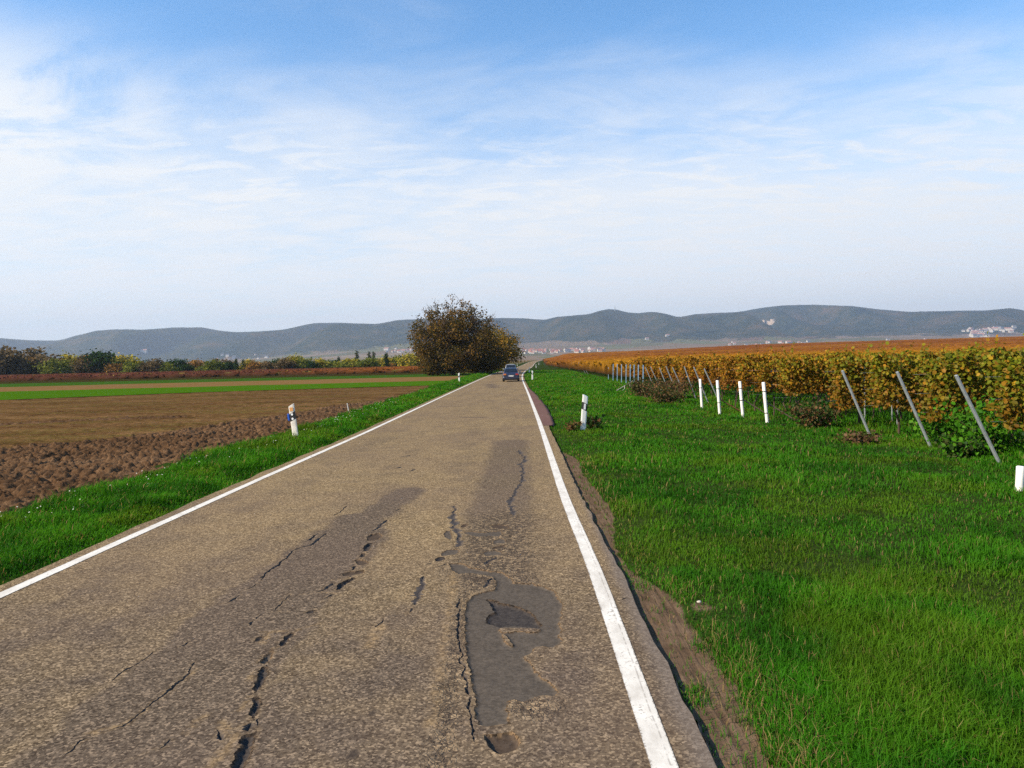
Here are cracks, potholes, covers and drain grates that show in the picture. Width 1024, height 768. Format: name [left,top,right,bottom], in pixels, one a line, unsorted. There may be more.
crack [455,557,497,742]
crack [242,665,268,732]
pothole [484,731,521,755]
crack [65,641,195,755]
crack [410,506,464,612]
crack [158,730,225,750]
crack [227,533,369,626]
crack [506,450,529,528]
